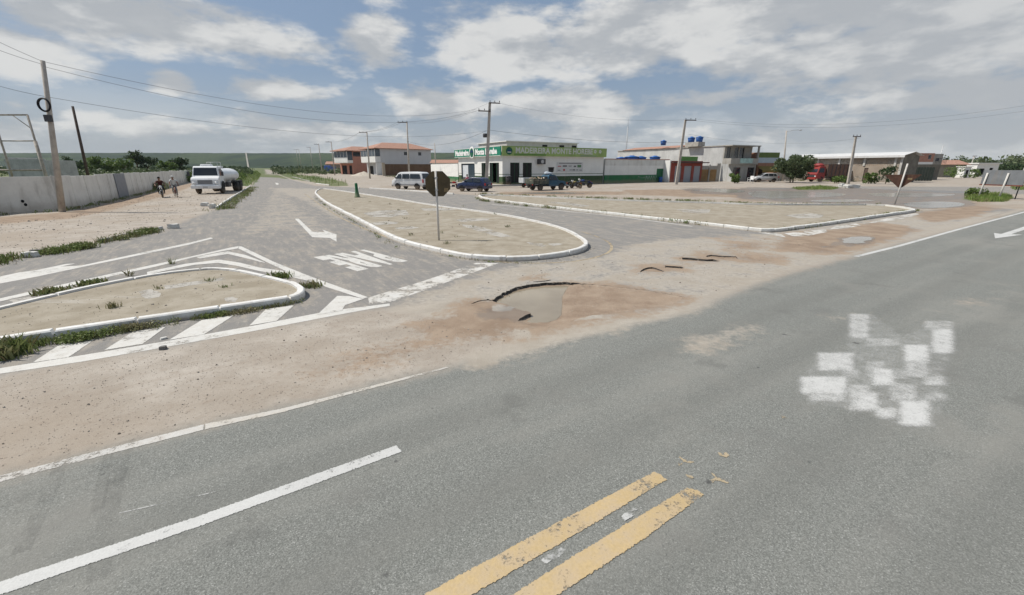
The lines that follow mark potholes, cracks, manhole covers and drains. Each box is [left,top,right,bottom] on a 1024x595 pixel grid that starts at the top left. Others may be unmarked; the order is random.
pothole [492,282,683,327]
